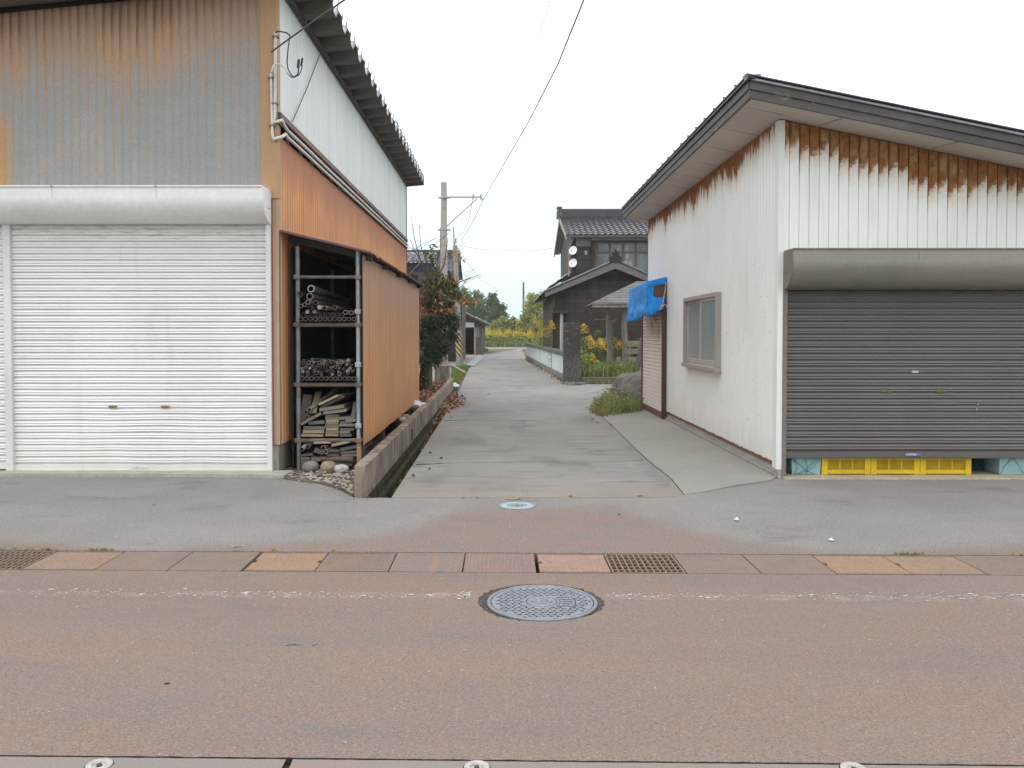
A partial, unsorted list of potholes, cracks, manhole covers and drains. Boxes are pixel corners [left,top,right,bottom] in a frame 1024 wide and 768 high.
utility cover [498,501,536,510]
manhole cover [478,585,604,622]
drain grate [604,554,686,574]
drain grate [0,551,57,570]
